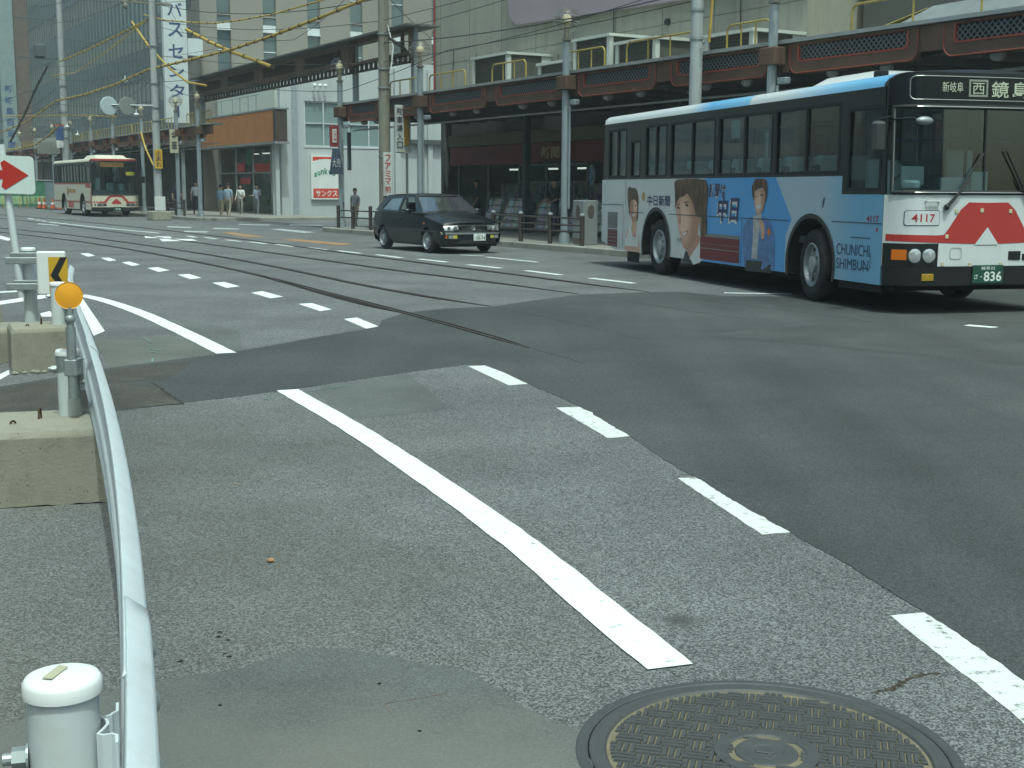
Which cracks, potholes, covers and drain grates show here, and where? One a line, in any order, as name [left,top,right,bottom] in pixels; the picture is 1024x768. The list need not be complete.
crack [871,672,940,694]
manhole cover [576,680,965,768]
